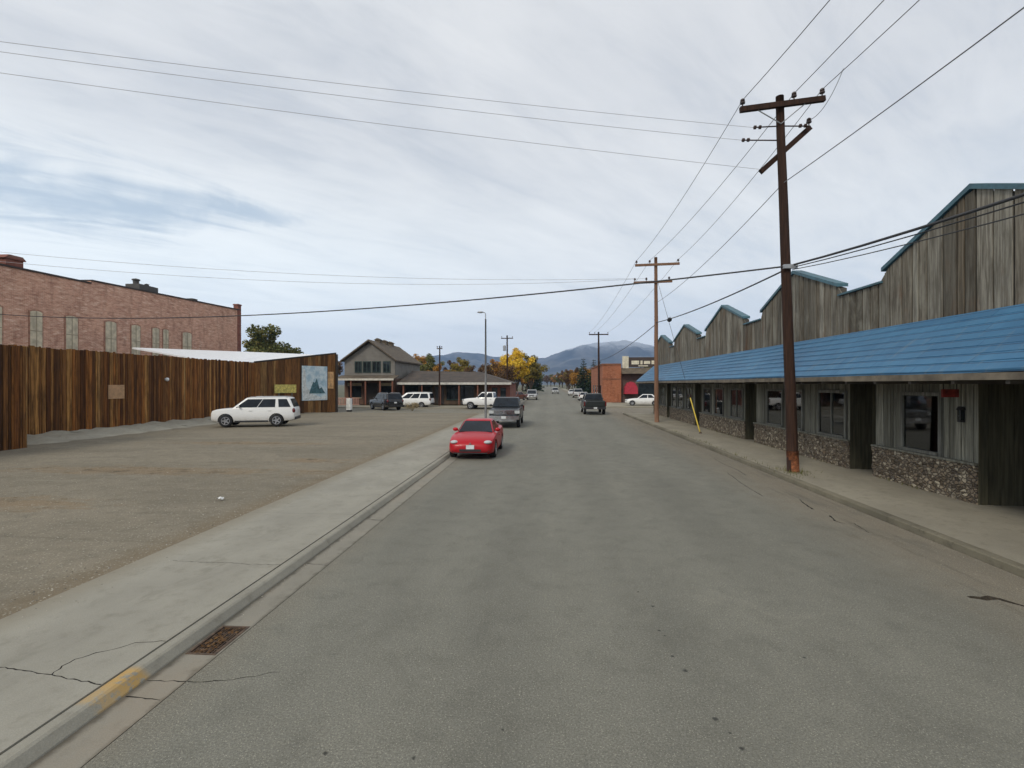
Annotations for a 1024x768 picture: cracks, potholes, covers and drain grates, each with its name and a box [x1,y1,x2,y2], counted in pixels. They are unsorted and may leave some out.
crack [0,640,162,685]
crack [126,672,271,700]
drain grate [185,625,250,655]
